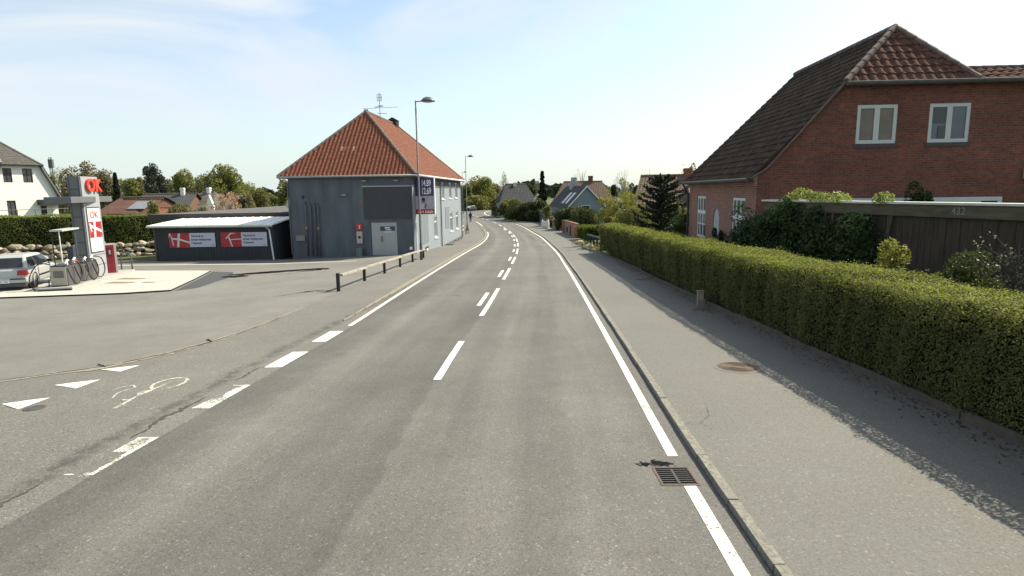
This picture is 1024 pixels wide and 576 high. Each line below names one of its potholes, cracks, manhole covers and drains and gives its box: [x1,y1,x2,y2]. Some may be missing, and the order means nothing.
drain grate [651,466,701,486]
manhole cover [712,361,765,373]
